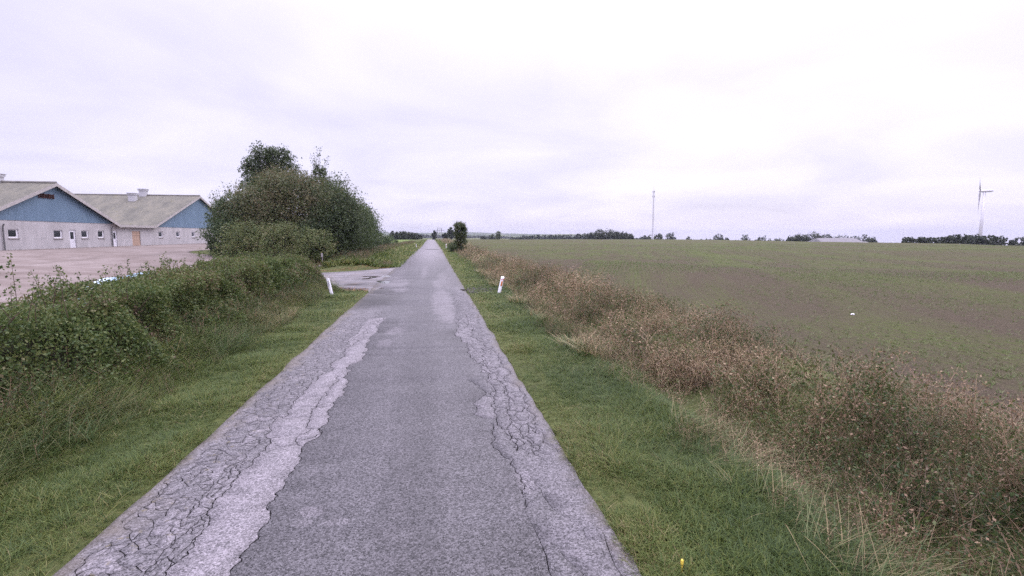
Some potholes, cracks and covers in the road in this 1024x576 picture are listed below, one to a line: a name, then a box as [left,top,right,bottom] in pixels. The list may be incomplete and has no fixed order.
crack [454,293,622,576]
crack [75,318,379,576]
